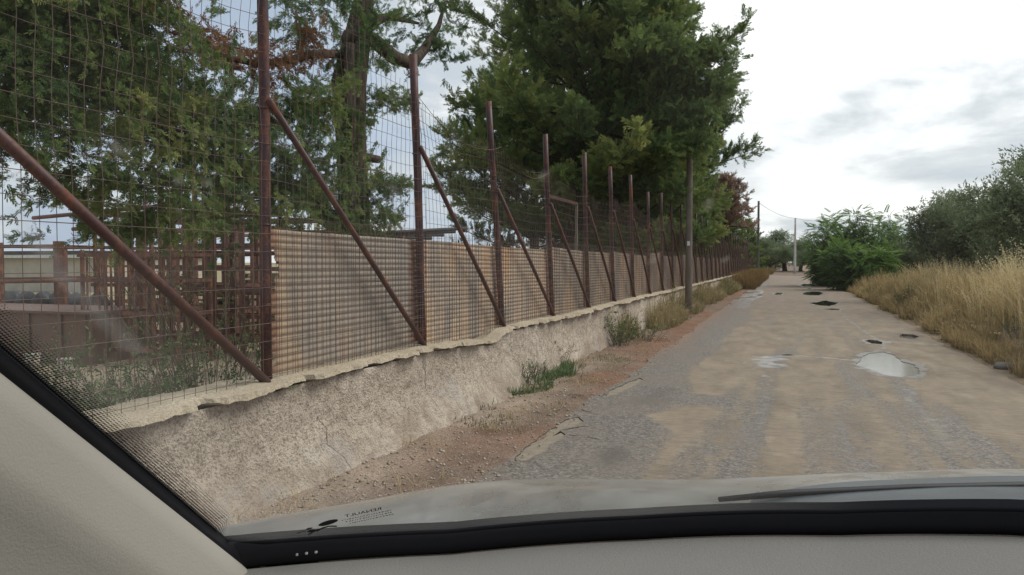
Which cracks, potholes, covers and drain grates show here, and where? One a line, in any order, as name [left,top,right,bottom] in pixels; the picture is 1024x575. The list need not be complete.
pothole [856,352,920,377]
